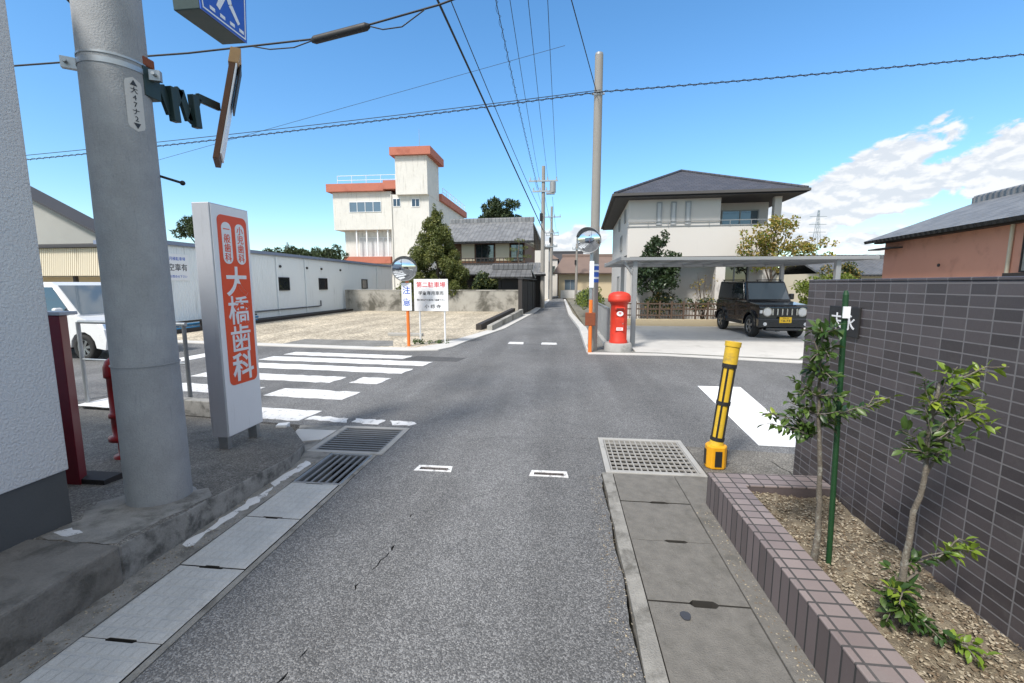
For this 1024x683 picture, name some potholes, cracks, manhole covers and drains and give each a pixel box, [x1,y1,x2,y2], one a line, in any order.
drain grate [598,437,708,477]
drain grate [306,426,410,455]
drain grate [293,453,372,486]
crack [278,515,412,683]
